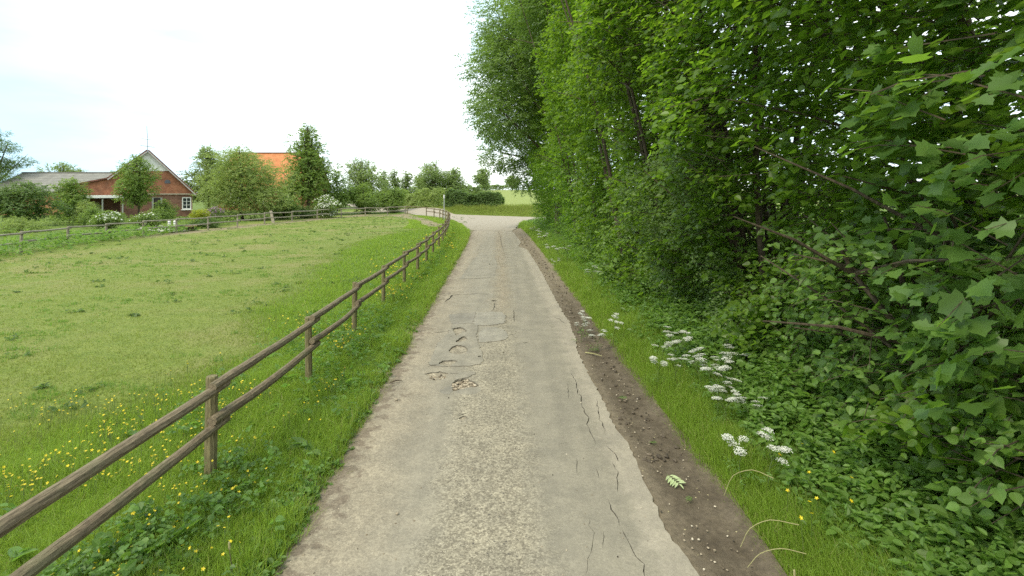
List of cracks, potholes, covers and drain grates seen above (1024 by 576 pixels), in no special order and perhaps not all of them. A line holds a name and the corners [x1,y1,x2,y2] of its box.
pothole [452,379,478,391]
pothole [426,372,448,380]
pothole [449,346,467,354]
